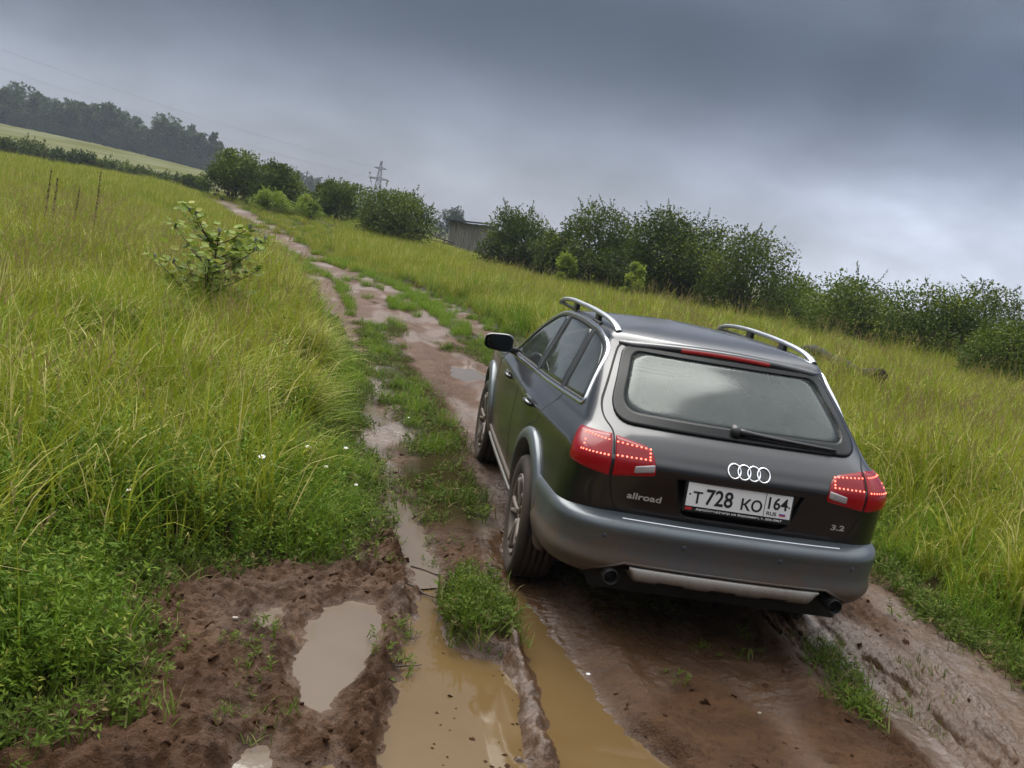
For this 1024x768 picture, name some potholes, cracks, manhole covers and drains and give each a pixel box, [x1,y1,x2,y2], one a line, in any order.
pothole [274,583,398,716]
